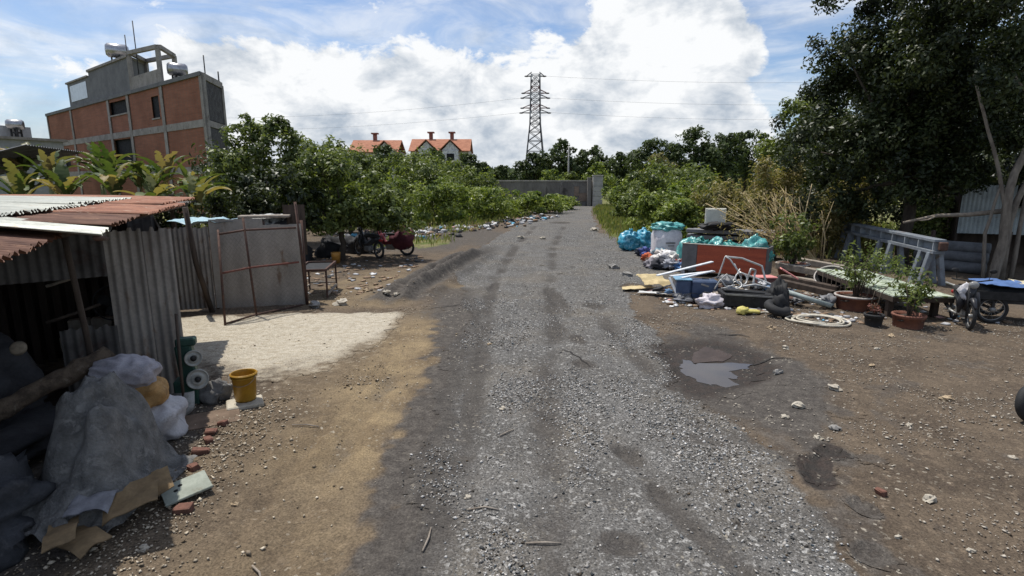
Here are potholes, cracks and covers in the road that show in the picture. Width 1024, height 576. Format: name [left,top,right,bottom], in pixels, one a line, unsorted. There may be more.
pothole [801,457,841,486]
pothole [841,495,885,519]
pothole [663,334,766,410]
